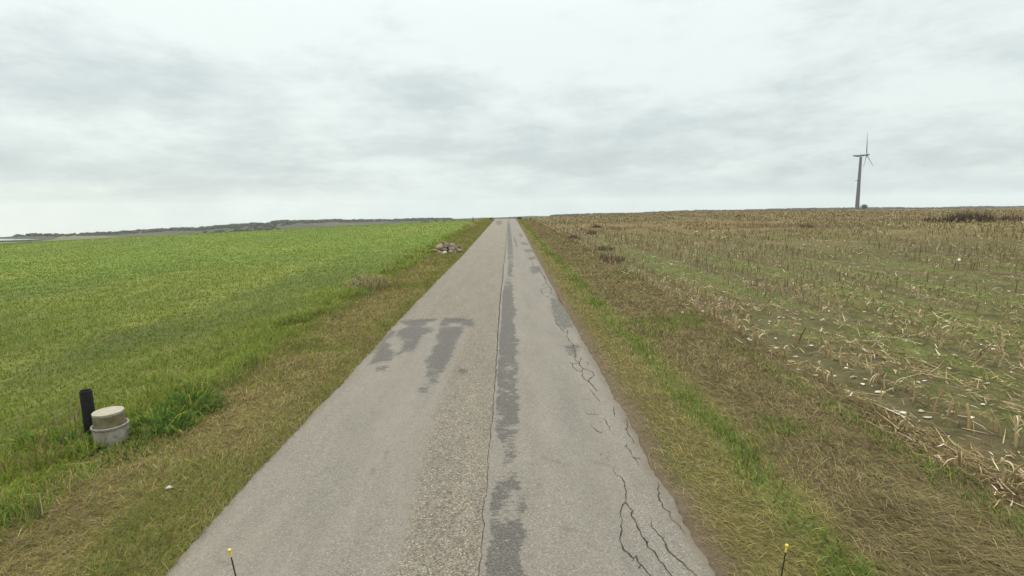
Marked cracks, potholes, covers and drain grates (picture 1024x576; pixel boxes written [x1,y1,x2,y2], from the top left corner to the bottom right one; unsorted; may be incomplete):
crack [514,230,697,576]
